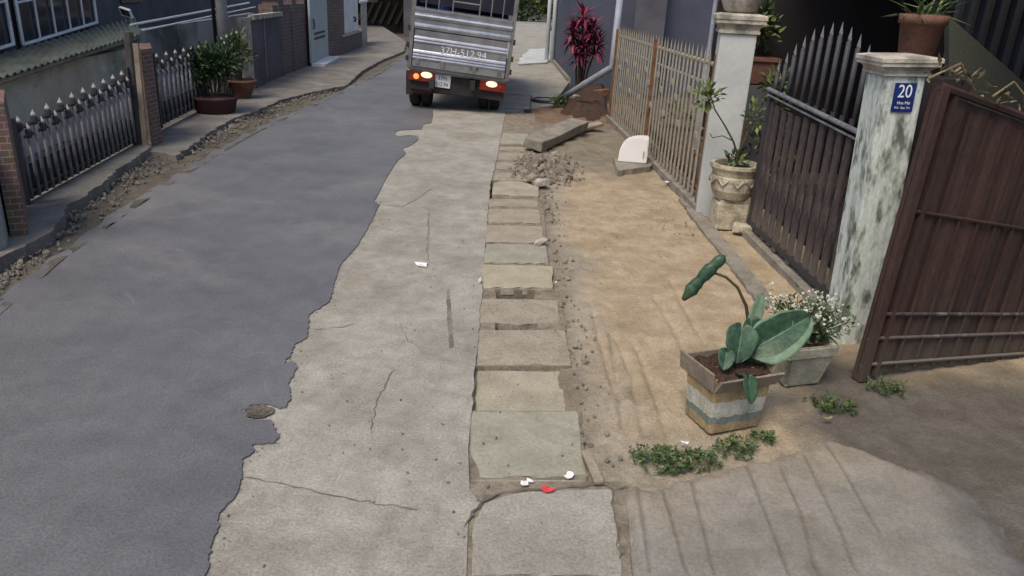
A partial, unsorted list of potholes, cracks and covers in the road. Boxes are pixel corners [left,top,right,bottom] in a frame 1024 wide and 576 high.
pothole [240,405,274,418]
crack [370,369,394,436]
